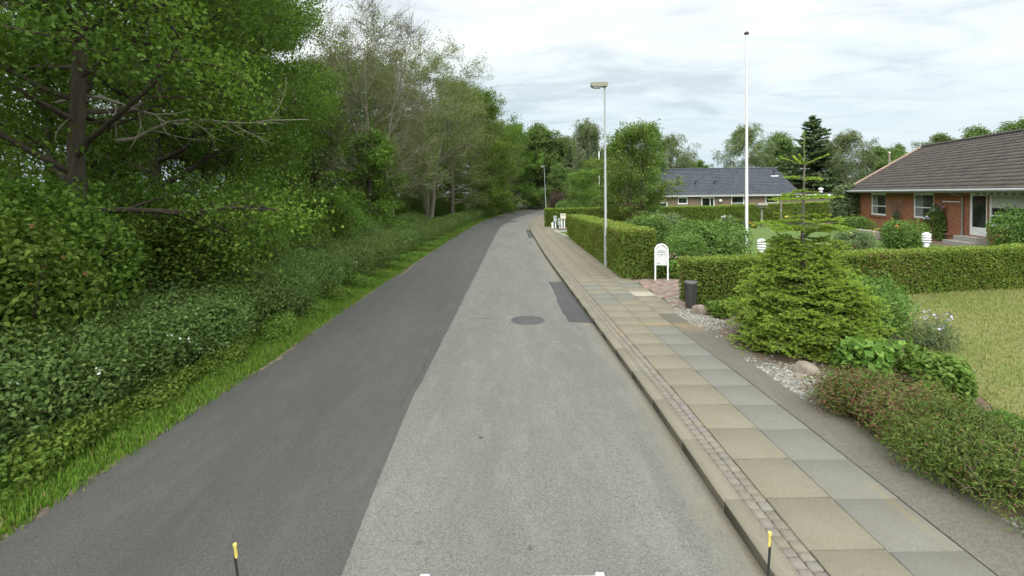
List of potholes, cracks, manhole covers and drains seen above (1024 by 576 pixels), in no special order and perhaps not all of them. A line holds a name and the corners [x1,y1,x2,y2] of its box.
manhole cover [510,316,545,325]
